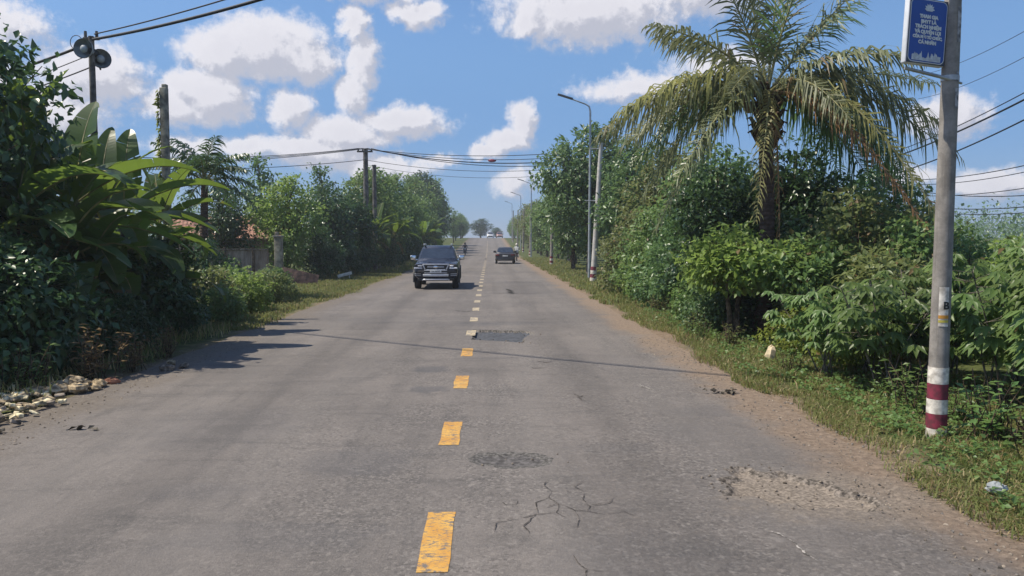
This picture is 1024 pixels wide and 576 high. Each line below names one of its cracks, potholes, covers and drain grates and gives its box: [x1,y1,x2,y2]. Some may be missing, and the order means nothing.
crack [494,480,633,534]
pothole [701,462,891,519]
